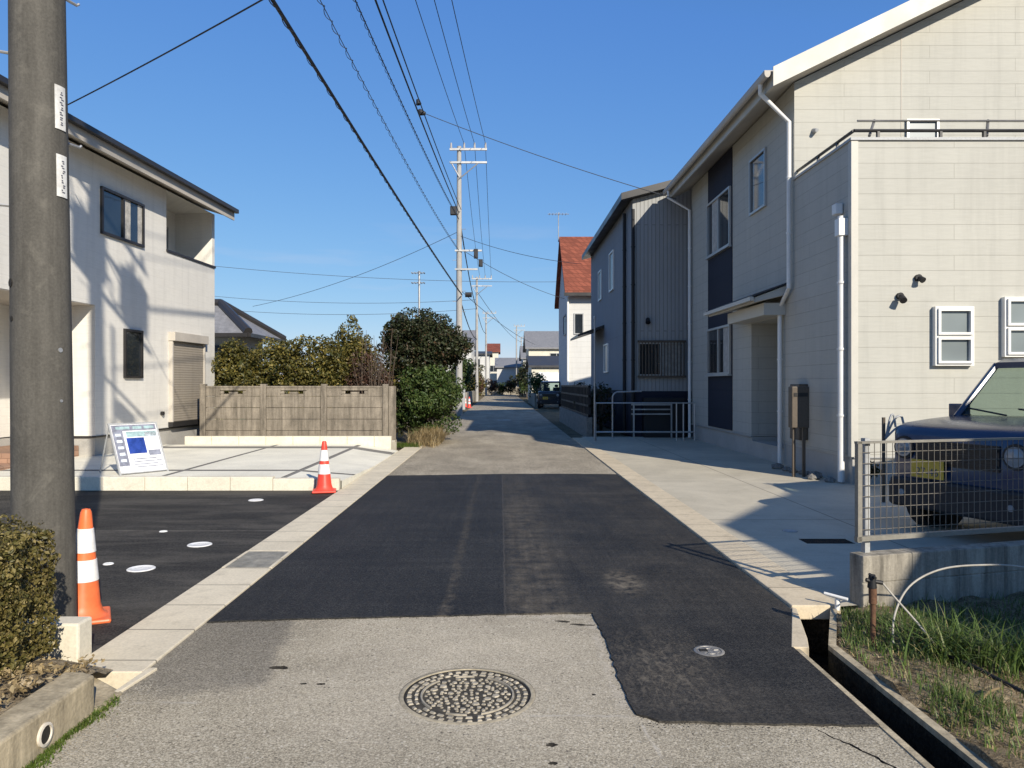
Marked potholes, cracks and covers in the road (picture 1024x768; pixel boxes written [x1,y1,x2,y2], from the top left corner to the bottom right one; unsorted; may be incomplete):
utility cover [693,645,725,657]
drain grate [222,551,292,569]
manhole cover [399,668,536,725]
crack [816,729,897,768]
